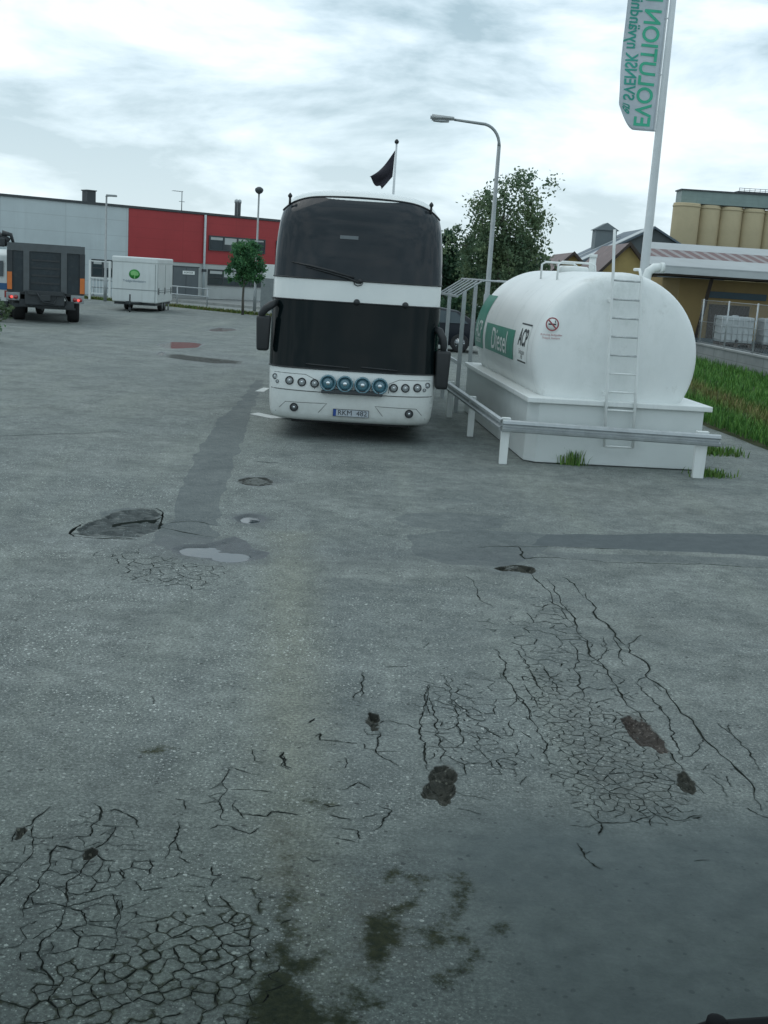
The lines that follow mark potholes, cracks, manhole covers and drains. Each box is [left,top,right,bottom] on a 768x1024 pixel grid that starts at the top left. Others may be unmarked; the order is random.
crack [0,804,291,1024]
crack [380,574,768,869]
pothole [82,847,99,860]
crack [148,750,298,875]
pothole [676,769,697,795]
pothole [76,508,164,537]
pothole [620,714,670,754]
pothole [365,708,380,731]
crack [69,508,230,589]
crack [309,718,397,842]
pothole [14,826,28,842]
pothole [493,565,537,574]
